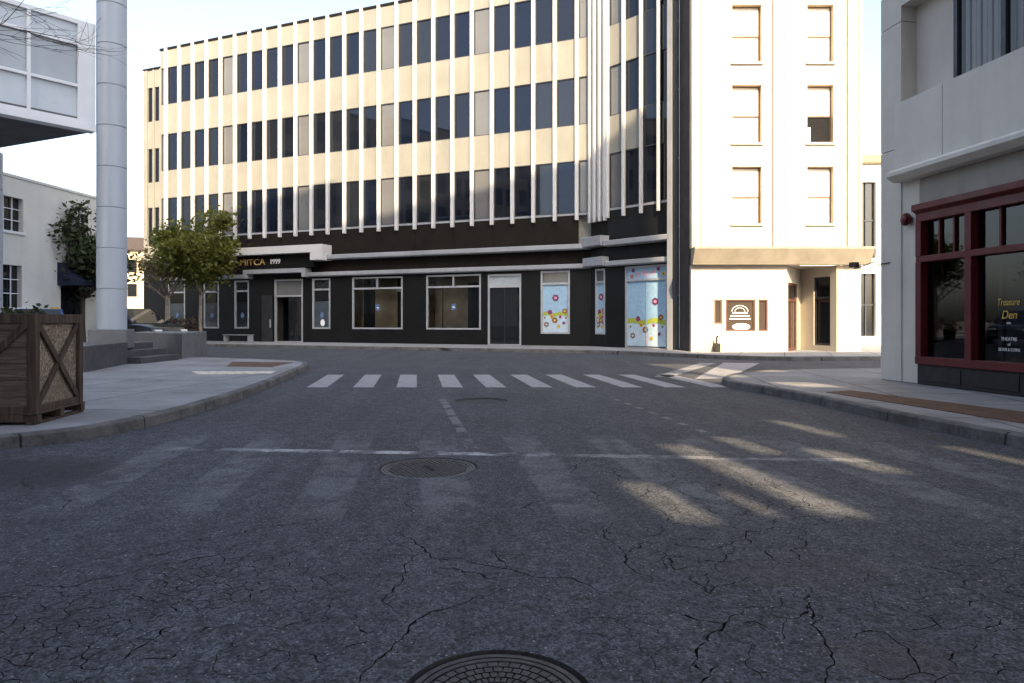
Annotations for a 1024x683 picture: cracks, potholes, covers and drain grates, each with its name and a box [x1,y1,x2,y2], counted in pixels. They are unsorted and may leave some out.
crack [0,492,883,683]
crack [587,465,850,594]
manhole cover [378,457,478,479]
crack [855,529,1024,683]
manhole cover [406,650,589,683]
